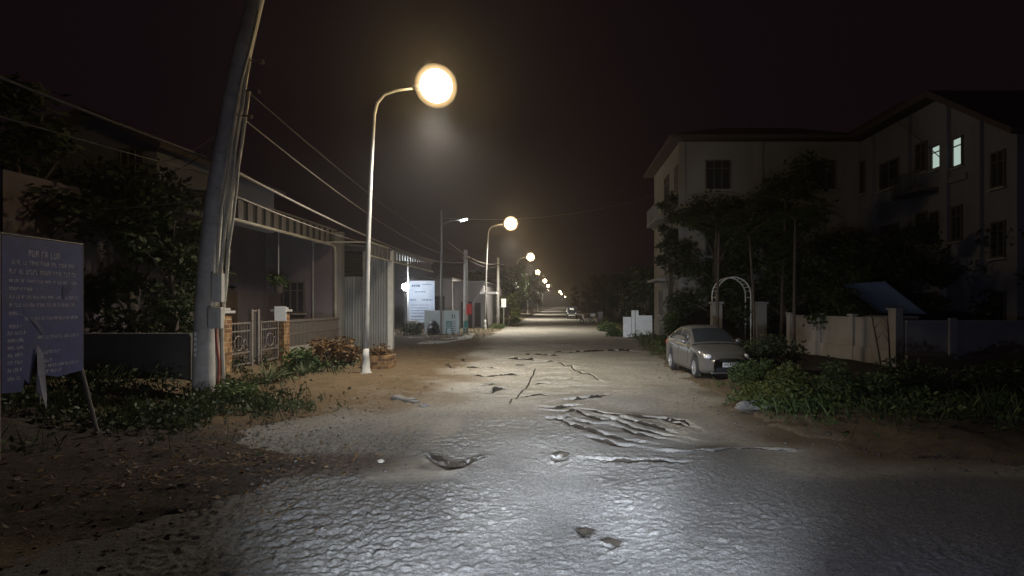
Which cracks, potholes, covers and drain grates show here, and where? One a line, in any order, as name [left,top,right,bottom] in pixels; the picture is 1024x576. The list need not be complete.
pothole [599,538,622,549]
crack [446,349,690,464]
pothole [574,528,596,538]
pothole [551,452,570,462]
pothole [428,452,486,470]
